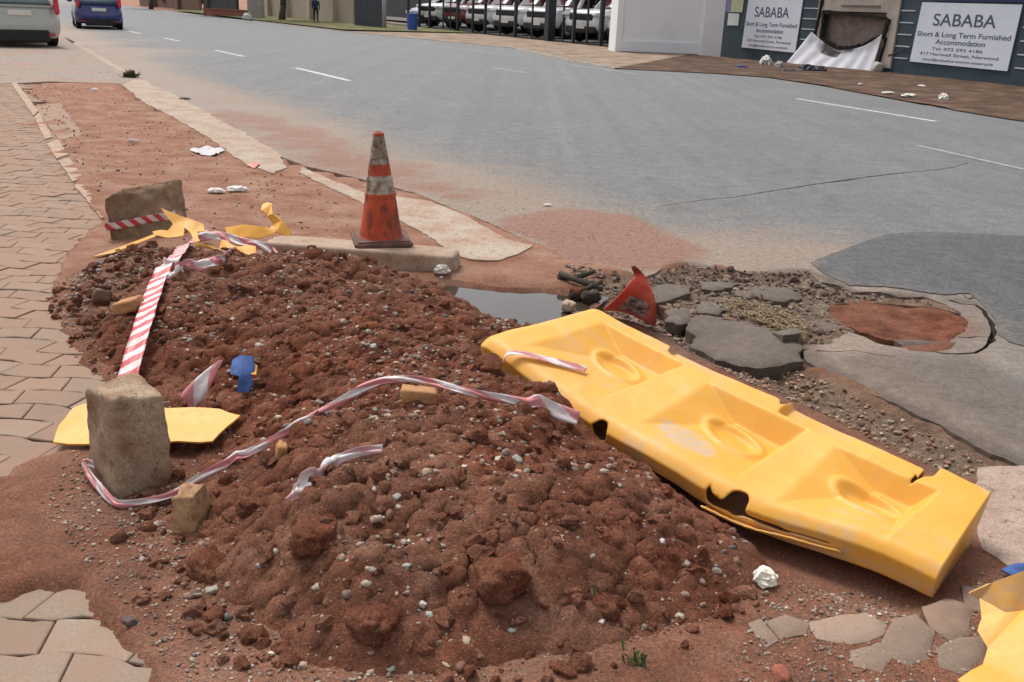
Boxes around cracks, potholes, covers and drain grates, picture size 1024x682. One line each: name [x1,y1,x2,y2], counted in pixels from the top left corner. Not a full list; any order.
pothole [433,280,601,311]
crack [665,163,967,206]
pothole [648,265,959,357]
